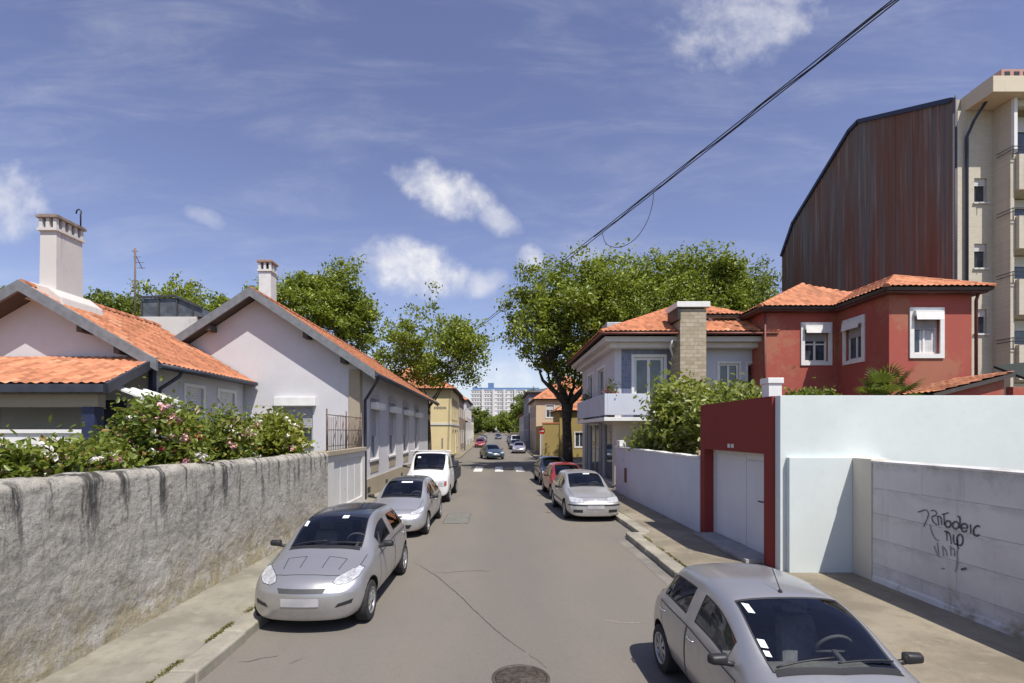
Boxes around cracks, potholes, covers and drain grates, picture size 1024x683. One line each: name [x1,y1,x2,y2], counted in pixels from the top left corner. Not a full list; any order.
crack [416,563,547,668]
manhole cover [492,664,550,683]
manhole cover [442,514,471,524]
